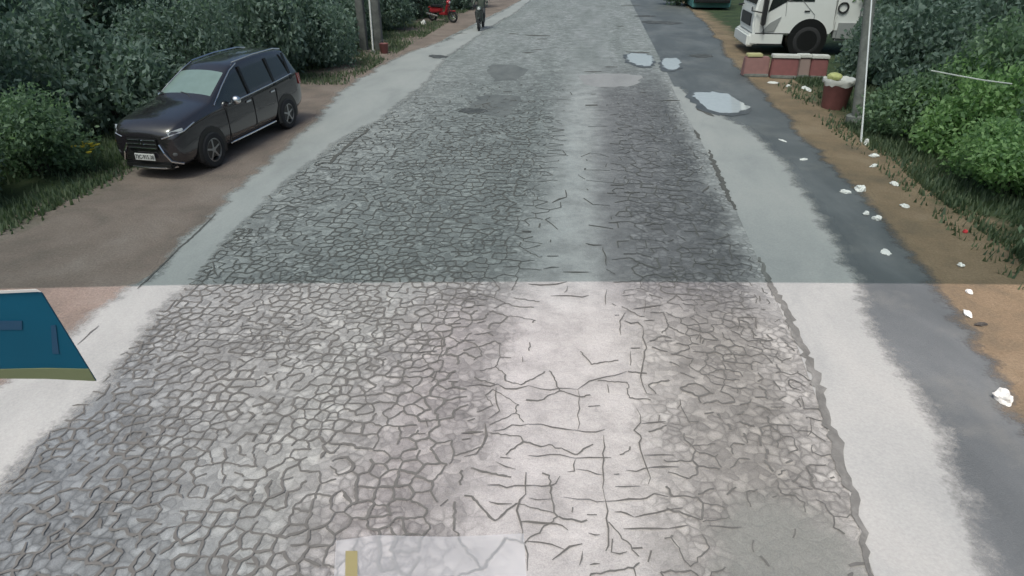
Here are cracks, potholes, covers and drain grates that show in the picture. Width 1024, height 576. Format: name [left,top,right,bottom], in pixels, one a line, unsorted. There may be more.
crack [0,82,874,576]
